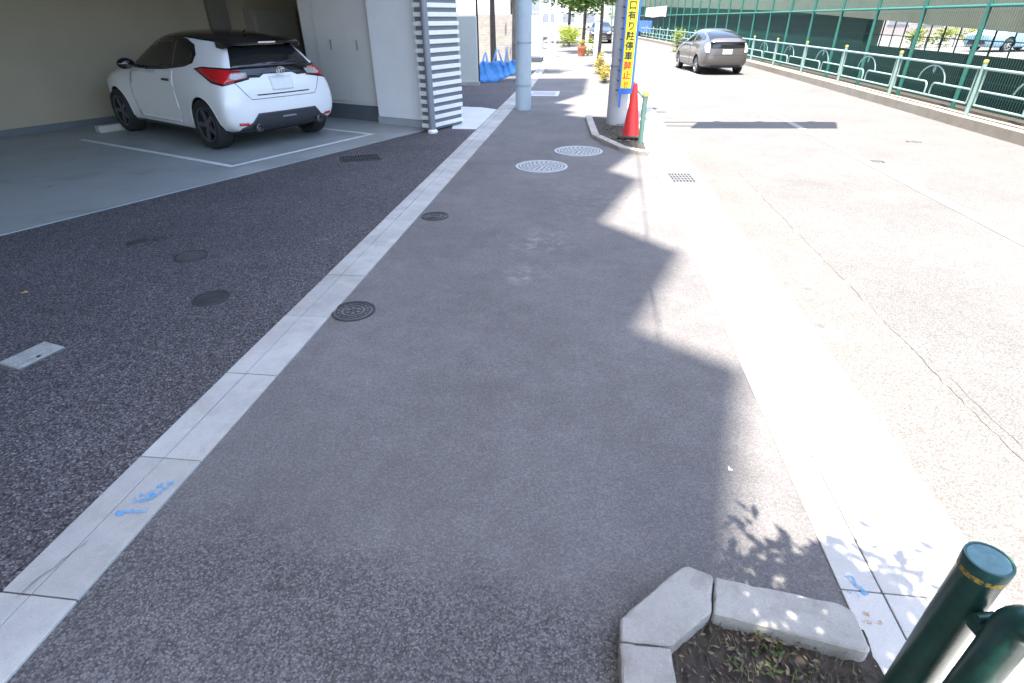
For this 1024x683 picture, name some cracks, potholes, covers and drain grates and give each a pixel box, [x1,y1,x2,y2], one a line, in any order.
crack [743,177,1023,458]
drain grate [665,173,699,183]
manhole cover [554,146,603,156]
manhole cover [516,160,568,173]
manhole cover [331,301,376,322]
manhole cover [173,250,208,262]
manhole cover [422,212,449,221]
manhole cover [192,290,230,306]
drain grate [340,154,382,163]
crack [16,542,86,598]
